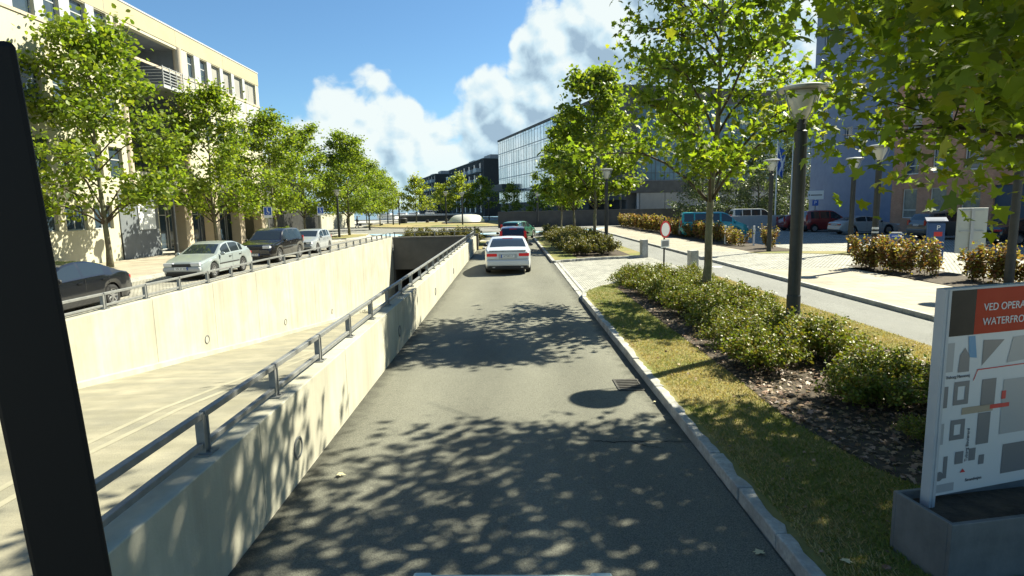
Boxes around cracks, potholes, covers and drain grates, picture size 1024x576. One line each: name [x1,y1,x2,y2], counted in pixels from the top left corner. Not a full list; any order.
crack [586,440,688,448]
drain grate [612,379,646,391]
